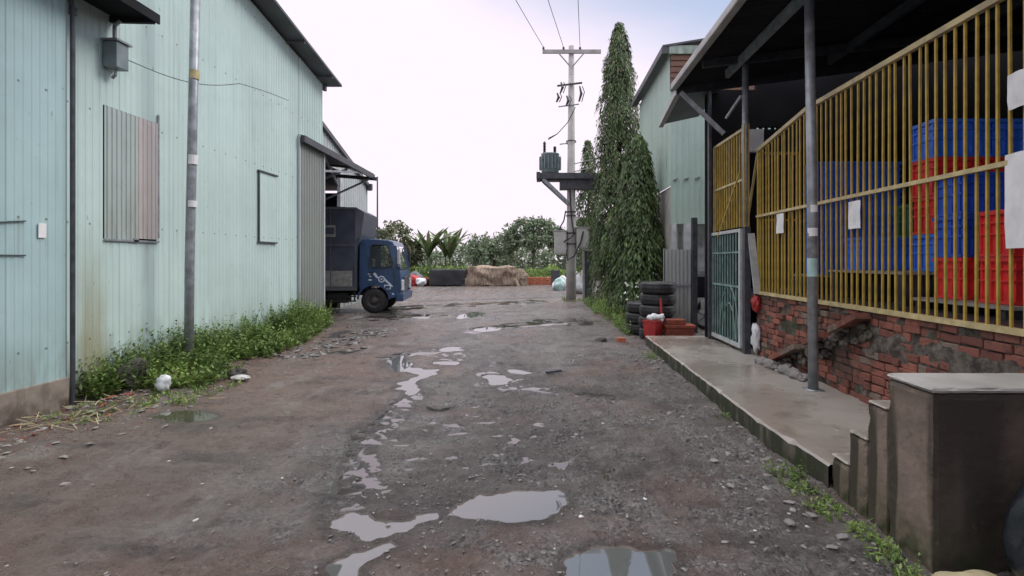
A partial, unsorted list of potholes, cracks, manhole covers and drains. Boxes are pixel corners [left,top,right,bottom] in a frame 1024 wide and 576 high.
pothole [152,410,218,423]
pothole [386,355,440,396]
pothole [329,511,440,541]
pothole [481,374,514,385]
pothole [324,541,400,576]
pothole [562,545,678,576]
pothole [449,489,569,523]
